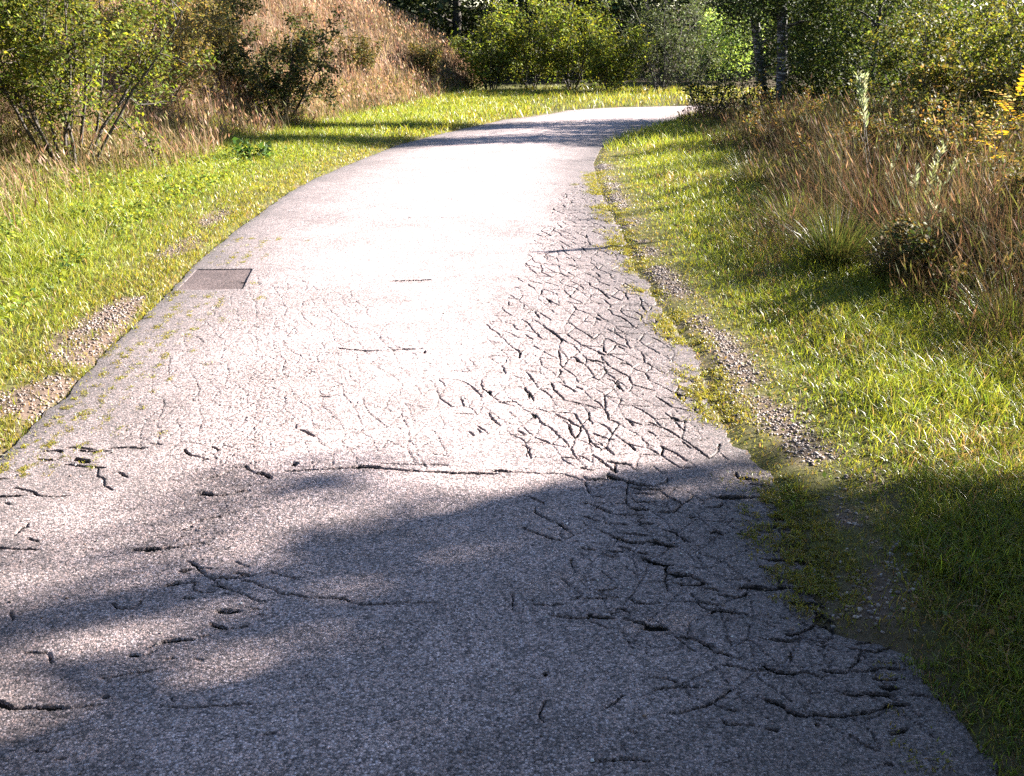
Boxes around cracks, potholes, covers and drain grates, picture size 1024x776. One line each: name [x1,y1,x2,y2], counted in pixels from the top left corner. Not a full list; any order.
crack [0,703,85,711]
crack [438,192,905,718]
crack [135,547,278,600]
crack [115,640,193,678]
crack [40,282,510,479]
